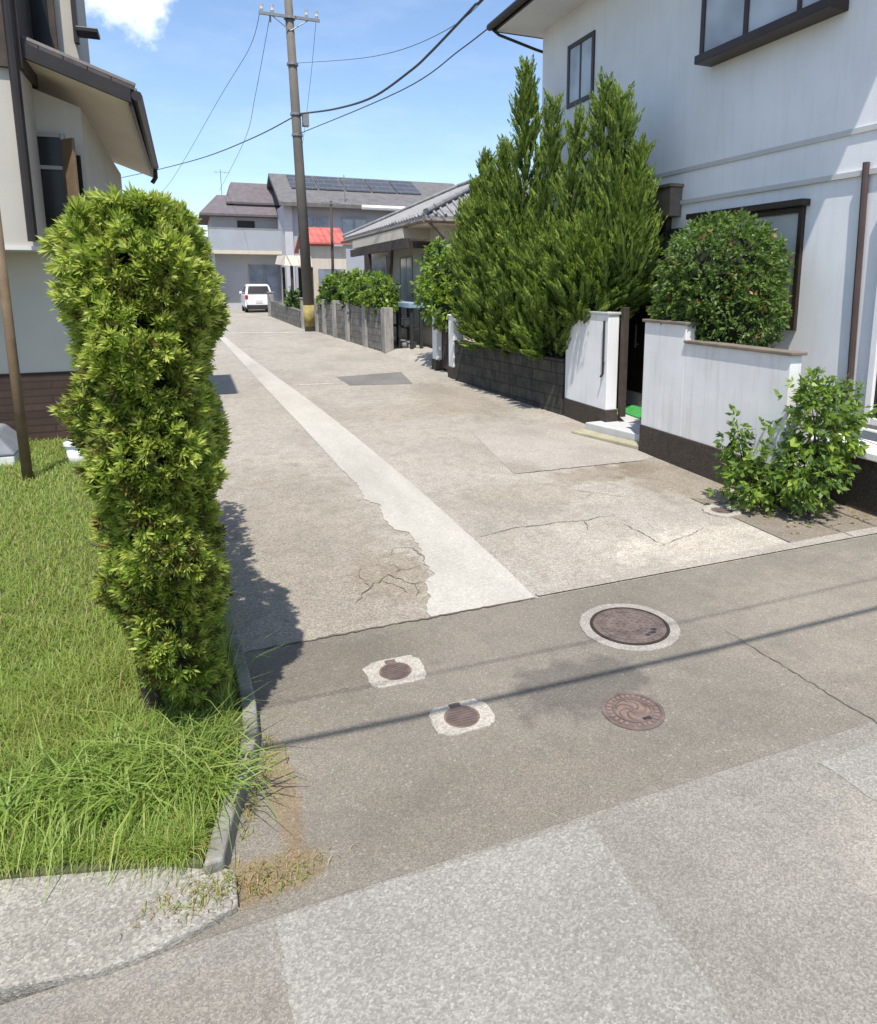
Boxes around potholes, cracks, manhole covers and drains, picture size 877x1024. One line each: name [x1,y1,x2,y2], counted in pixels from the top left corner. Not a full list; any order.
crack [483,515,701,544]
utility cover [362,655,427,689]
utility cover [429,698,495,737]
crack [727,631,877,723]
manhole cover [601,692,665,731]
manhole cover [580,603,681,652]
crack [345,547,428,603]
